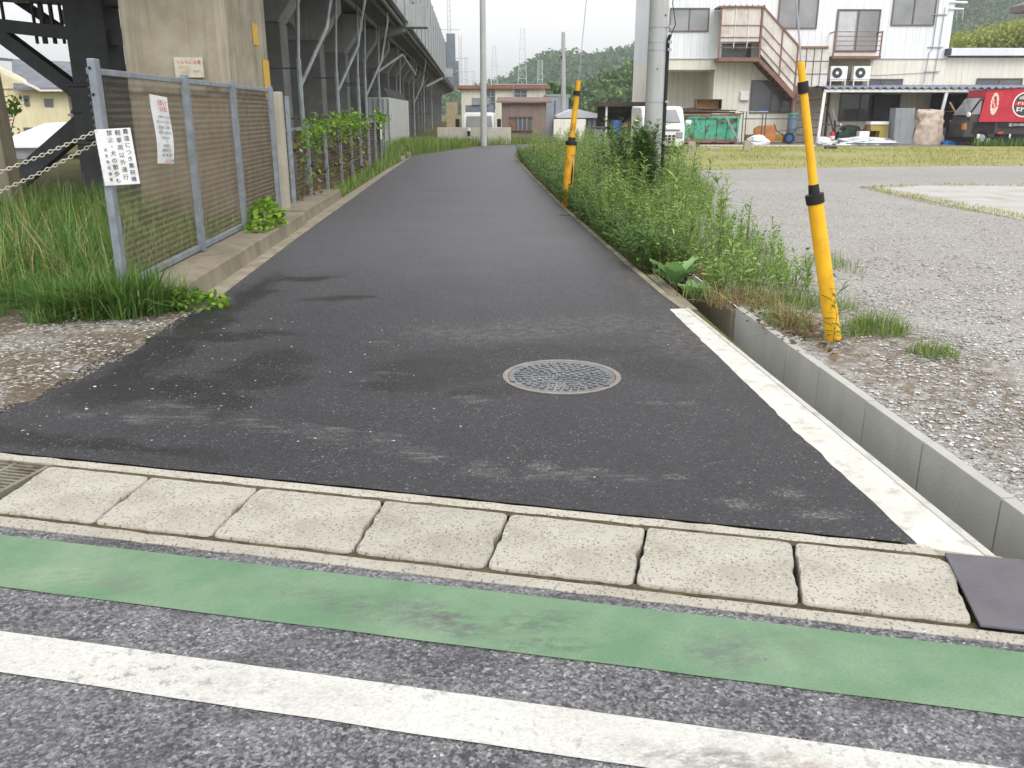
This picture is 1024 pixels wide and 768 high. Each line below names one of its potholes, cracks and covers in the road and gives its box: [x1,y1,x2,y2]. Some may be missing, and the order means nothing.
drain grate [0,459,54,500]
manhole cover [503,359,621,395]
